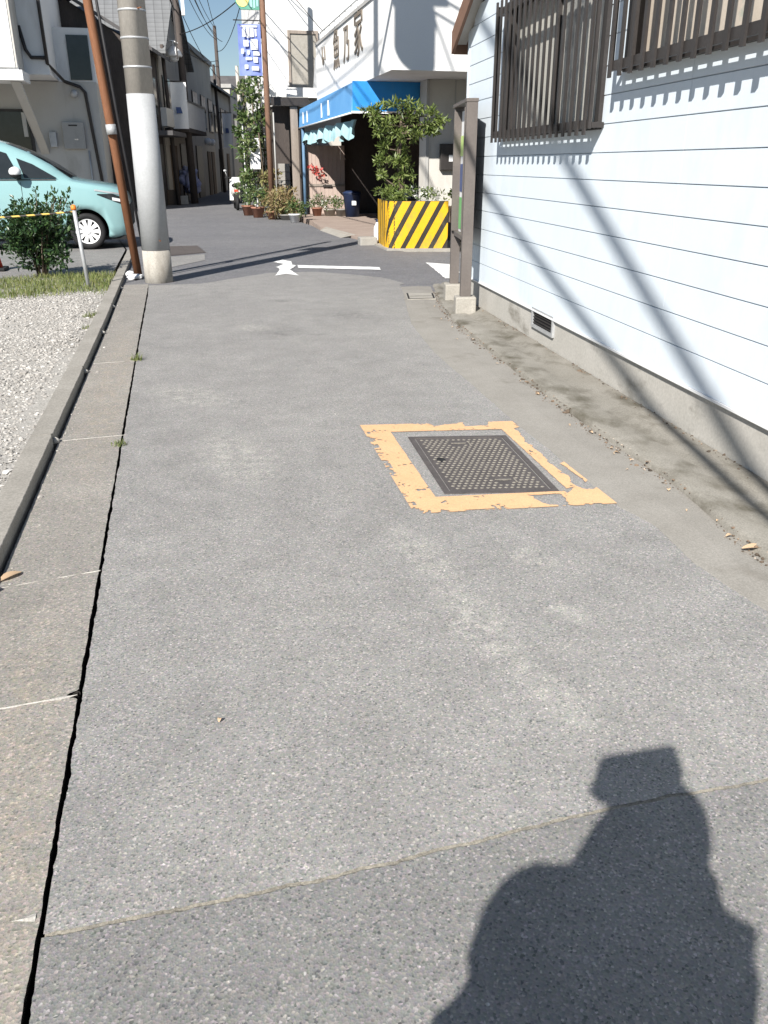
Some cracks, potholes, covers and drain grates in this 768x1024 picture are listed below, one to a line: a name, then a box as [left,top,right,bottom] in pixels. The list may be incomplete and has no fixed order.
manhole cover [408,435,559,494]
